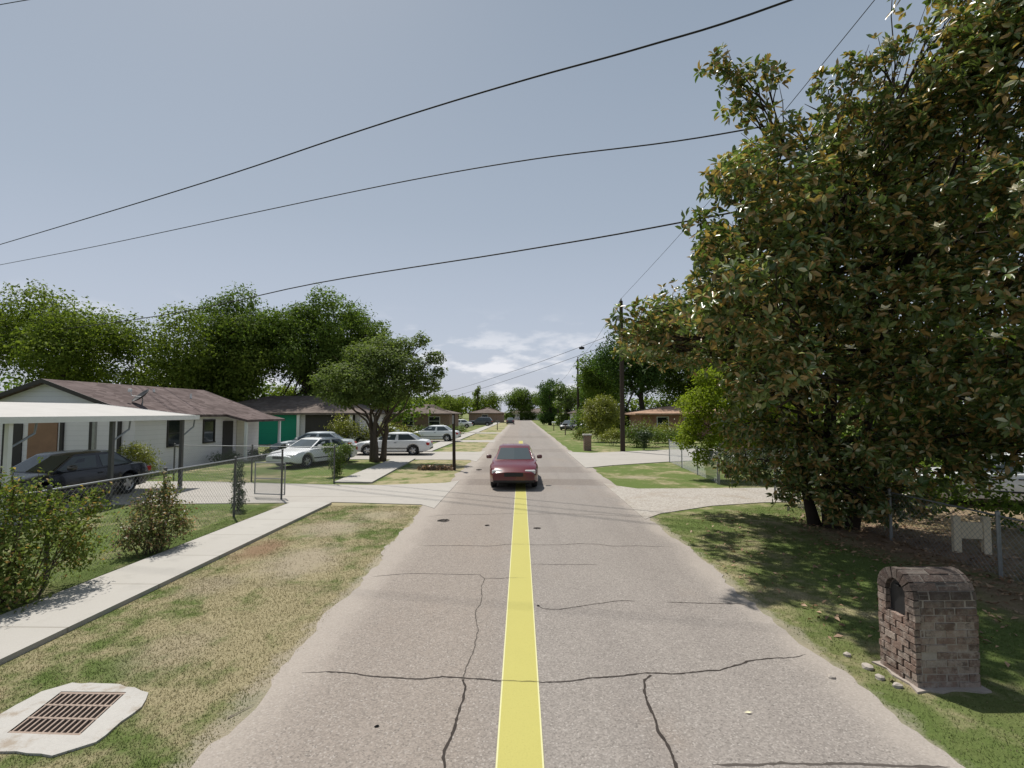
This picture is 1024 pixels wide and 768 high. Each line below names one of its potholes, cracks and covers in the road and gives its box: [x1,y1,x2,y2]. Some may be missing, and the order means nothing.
drain grate [0,682,148,758]
crack [305,573,805,768]
